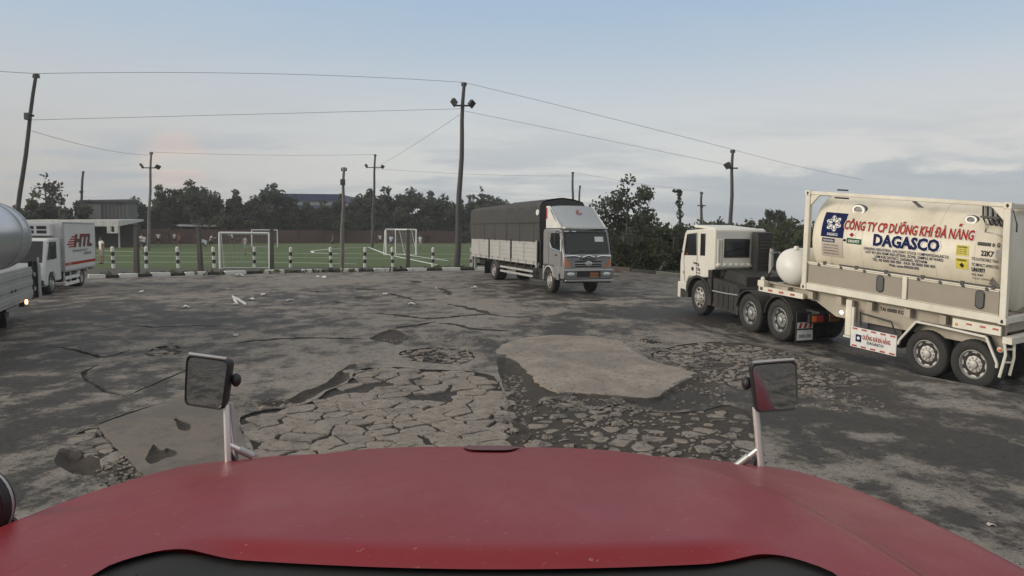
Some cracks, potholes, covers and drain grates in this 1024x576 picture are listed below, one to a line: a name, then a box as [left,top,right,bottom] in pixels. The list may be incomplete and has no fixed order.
pothole [145,445,177,464]
pothole [258,364,357,407]
pothole [175,419,191,431]
crack [48,345,186,468]
pothole [370,329,409,345]
crack [240,288,860,464]
pothole [569,392,613,407]
pothole [622,376,716,411]
pothole [496,357,567,447]
pothole [54,448,137,487]
